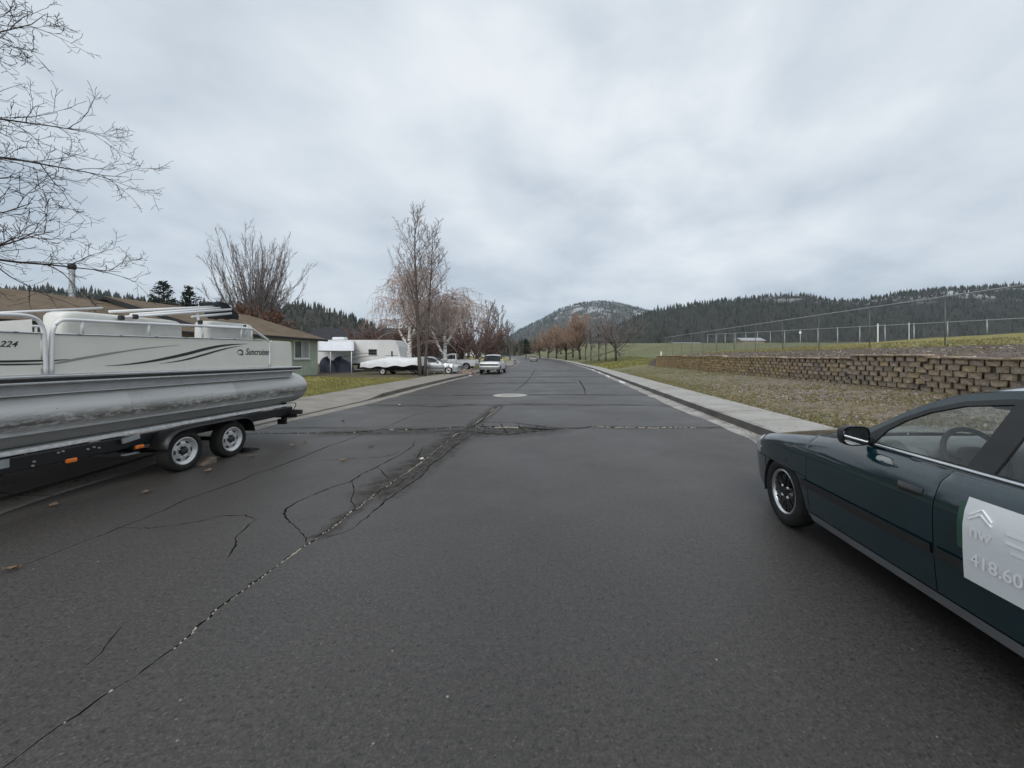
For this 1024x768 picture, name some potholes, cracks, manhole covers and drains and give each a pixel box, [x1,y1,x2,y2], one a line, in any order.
crack [3,376,722,768]
